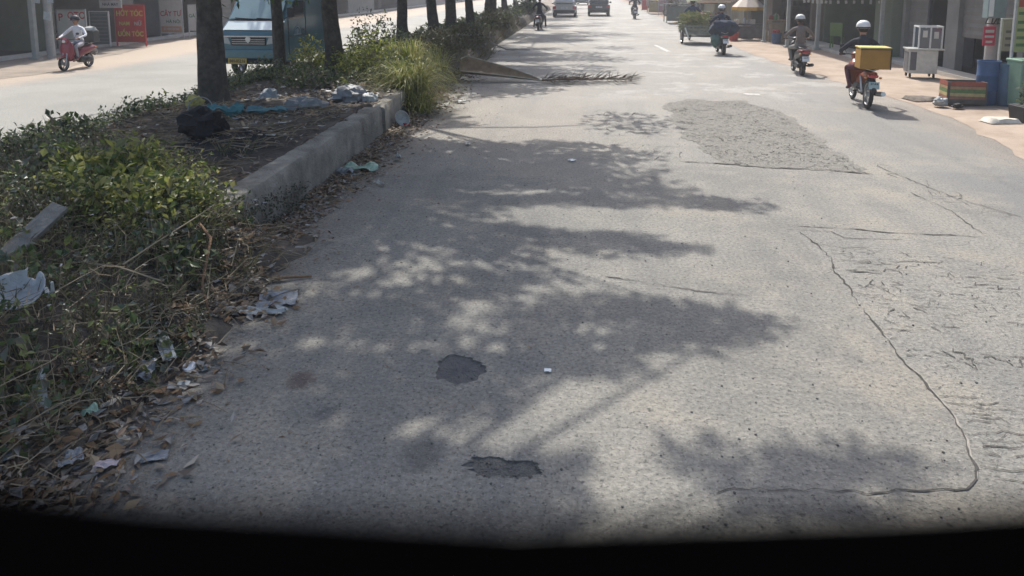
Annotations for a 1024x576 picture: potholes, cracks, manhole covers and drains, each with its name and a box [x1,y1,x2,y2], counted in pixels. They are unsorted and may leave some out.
pothole [461,455,544,479]
pothole [436,354,487,385]
crack [596,99,1024,494]
